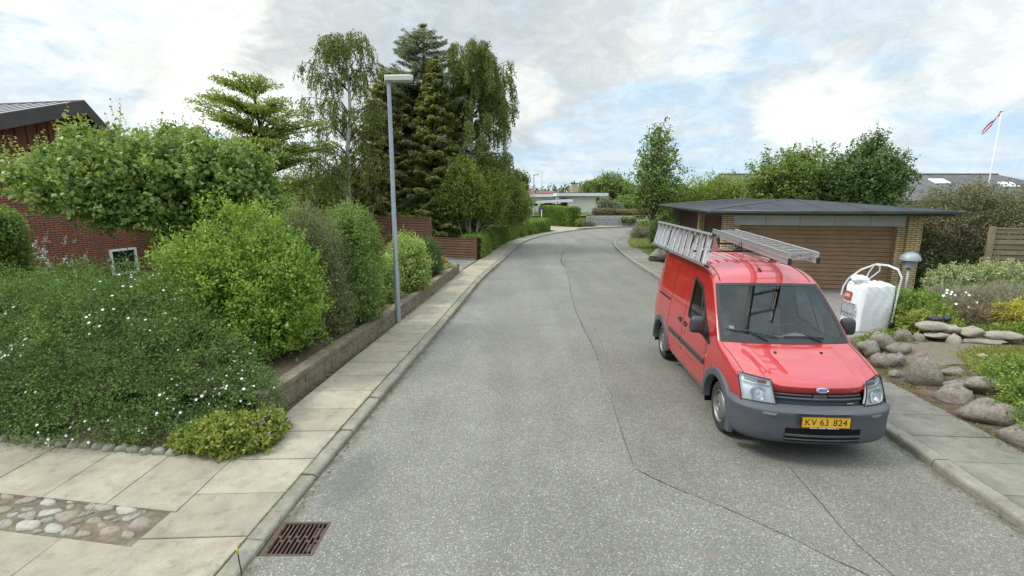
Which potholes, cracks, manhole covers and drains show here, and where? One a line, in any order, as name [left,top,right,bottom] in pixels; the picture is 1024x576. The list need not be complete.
crack [560,238,894,576]
drain grate [259,522,331,556]
